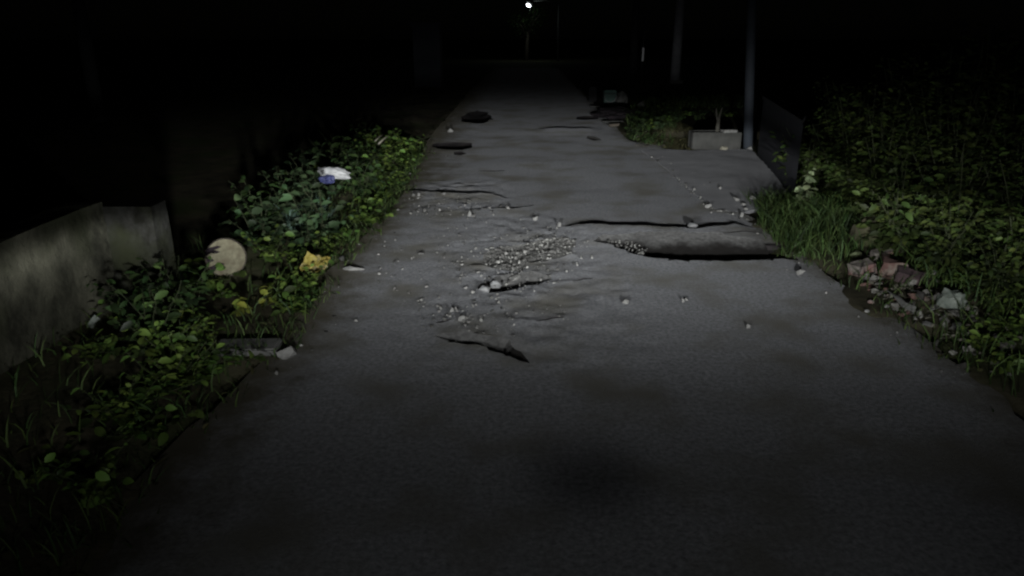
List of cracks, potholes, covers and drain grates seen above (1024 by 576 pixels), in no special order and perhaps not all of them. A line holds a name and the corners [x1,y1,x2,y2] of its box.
pothole [477,271,552,293]
pothole [594,231,798,262]
pothole [432,142,472,150]
pothole [461,110,493,124]
pothole [483,237,576,272]
